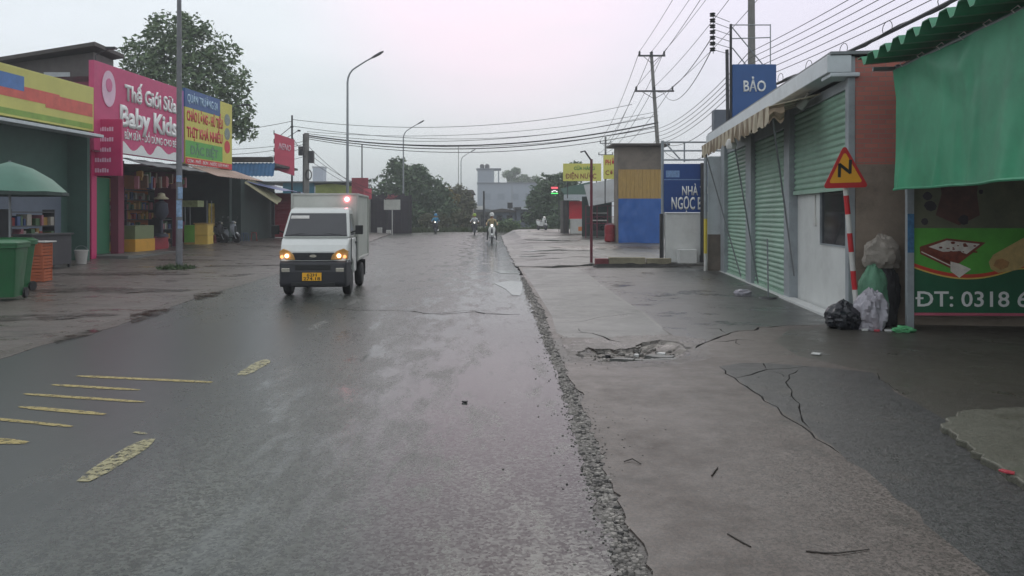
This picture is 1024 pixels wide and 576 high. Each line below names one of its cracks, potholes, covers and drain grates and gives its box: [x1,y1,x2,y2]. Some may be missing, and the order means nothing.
pothole [575,339,692,362]
crack [696,325,805,348]
crack [720,362,839,453]
crack [194,307,517,315]
